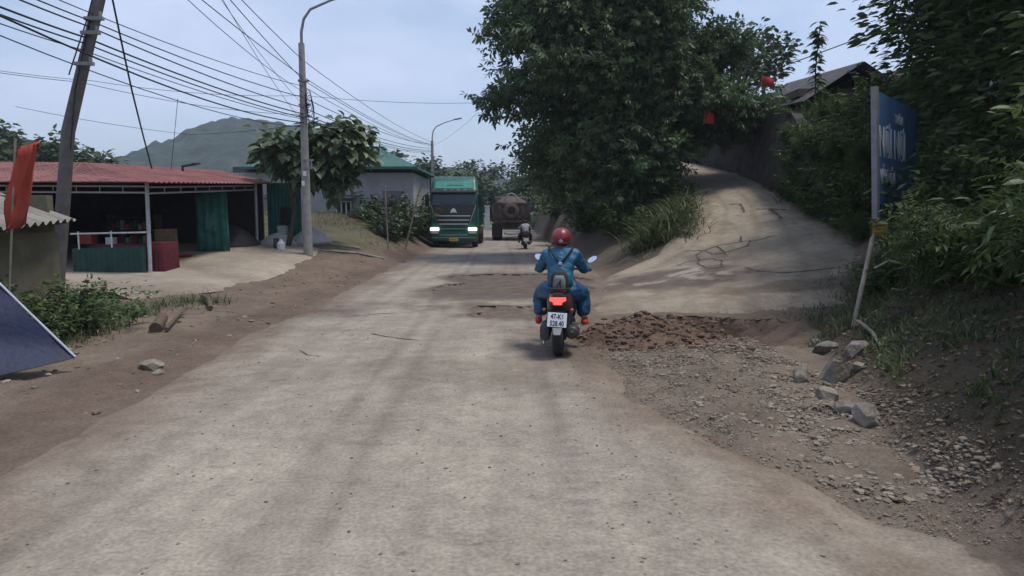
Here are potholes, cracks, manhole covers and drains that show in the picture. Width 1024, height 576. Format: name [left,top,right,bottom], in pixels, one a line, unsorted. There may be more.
pothole [465,305,547,319]
pothole [664,315,819,350]
pothole [427,273,598,298]
crack [677,235,835,273]
crack [767,208,786,219]
